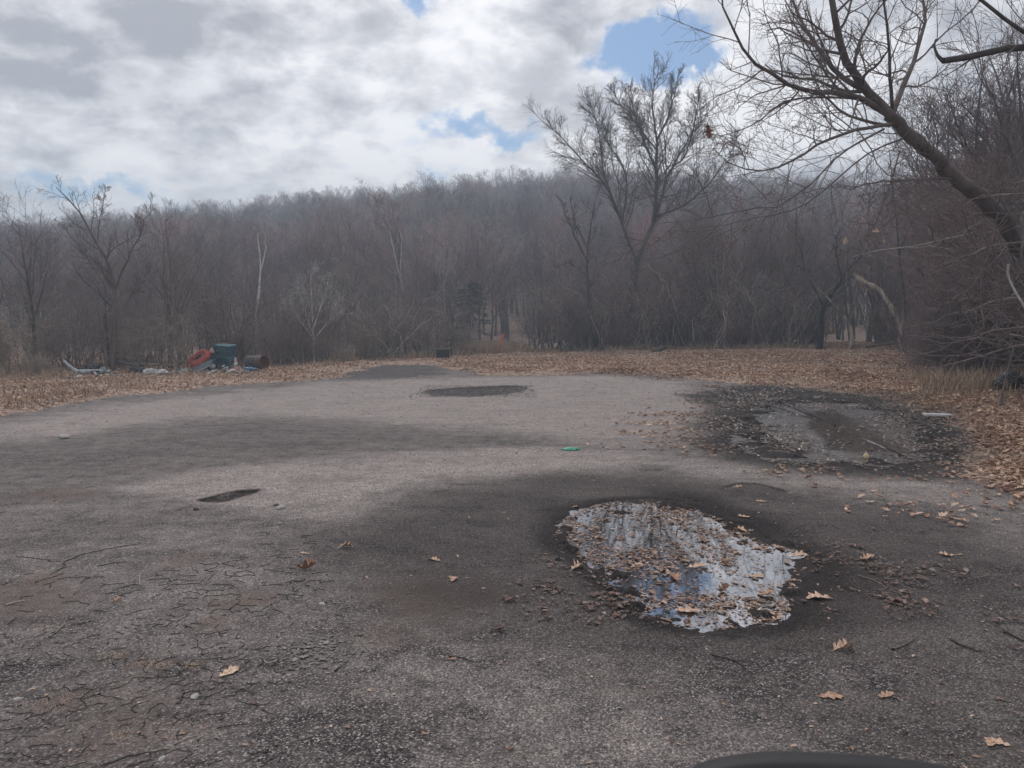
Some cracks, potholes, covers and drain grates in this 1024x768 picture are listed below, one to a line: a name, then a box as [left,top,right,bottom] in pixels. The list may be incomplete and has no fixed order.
pothole [529,493,844,647]
pothole [180,486,276,507]
crack [1,522,364,638]
pothole [716,396,965,470]
crack [0,609,304,768]
